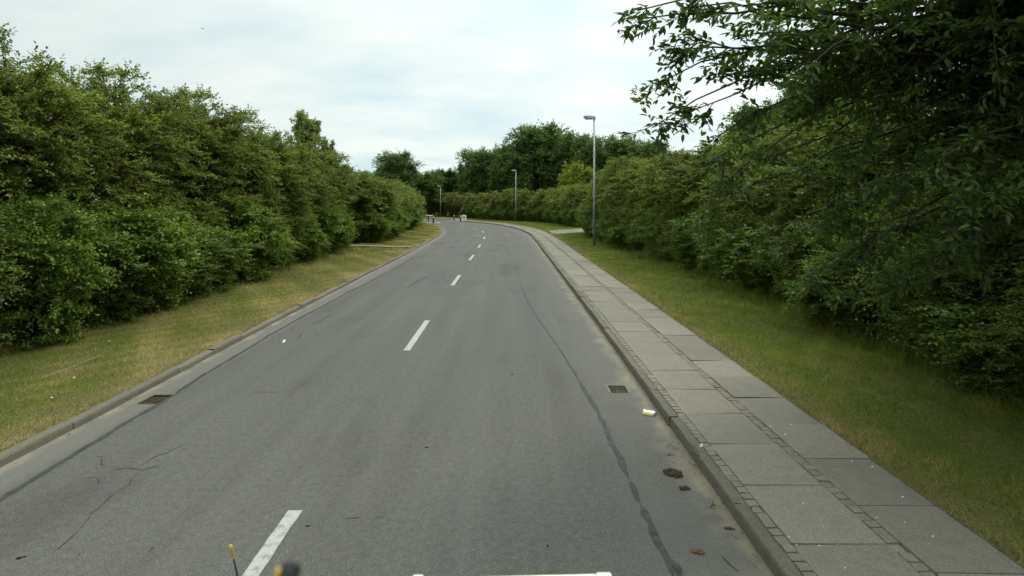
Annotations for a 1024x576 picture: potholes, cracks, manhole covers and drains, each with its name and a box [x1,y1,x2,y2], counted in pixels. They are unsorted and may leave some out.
drain grate [605,385,632,394]
drain grate [137,395,174,404]
crack [59,446,180,556]
